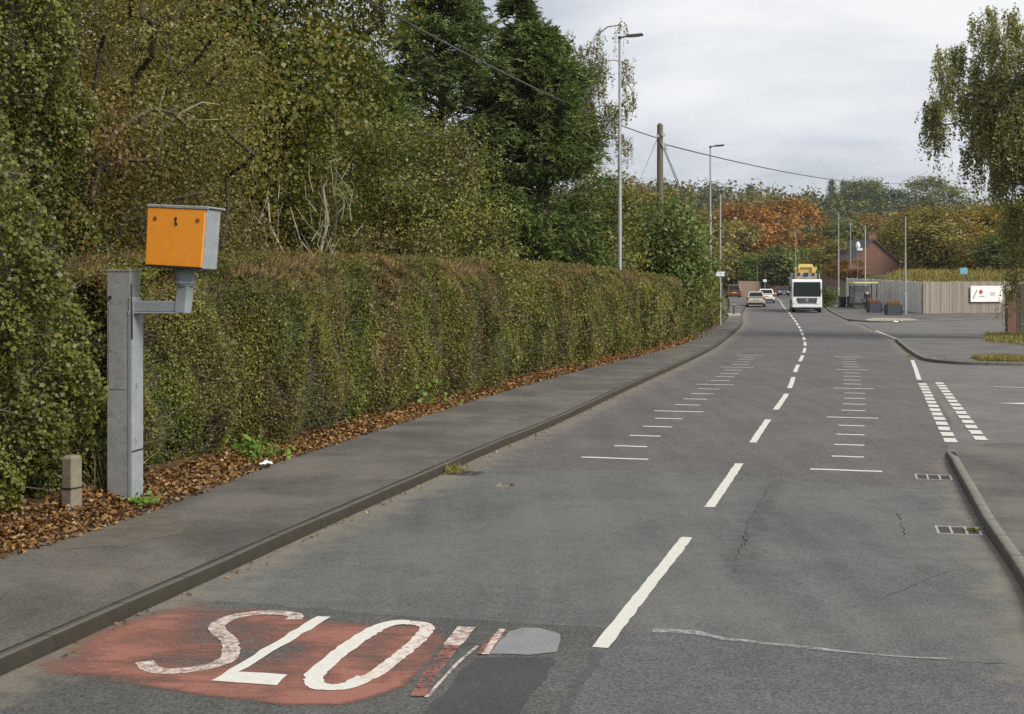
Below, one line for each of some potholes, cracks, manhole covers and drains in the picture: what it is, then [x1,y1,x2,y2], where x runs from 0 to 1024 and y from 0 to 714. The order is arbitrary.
crack [715,484,783,571]
drain grate [935,525,983,535]
crack [849,514,962,608]
